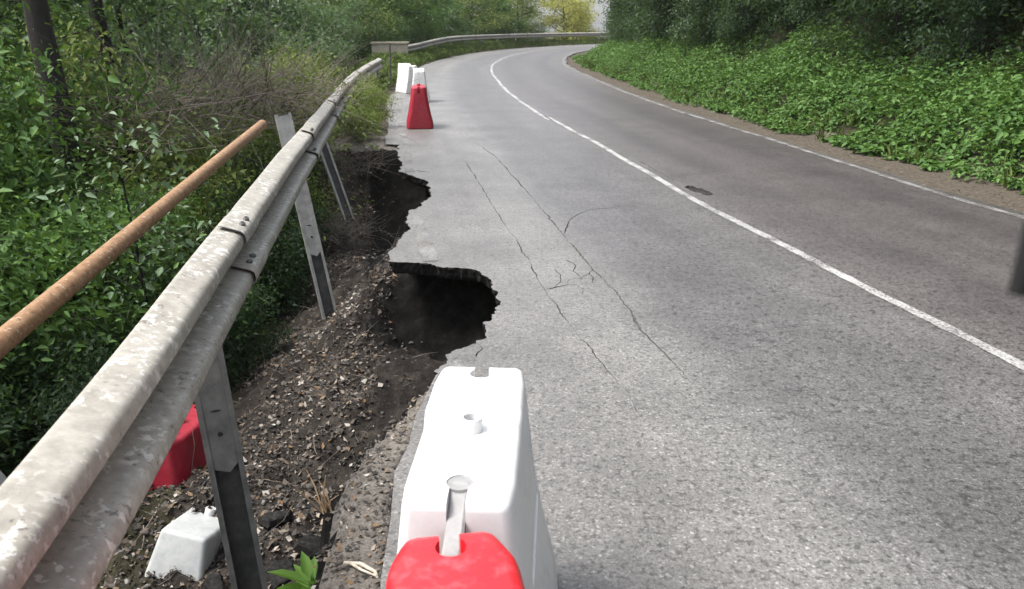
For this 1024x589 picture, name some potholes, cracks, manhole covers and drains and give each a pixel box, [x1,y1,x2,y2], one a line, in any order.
crack [462,148,698,426]
pothole [685,185,713,195]
